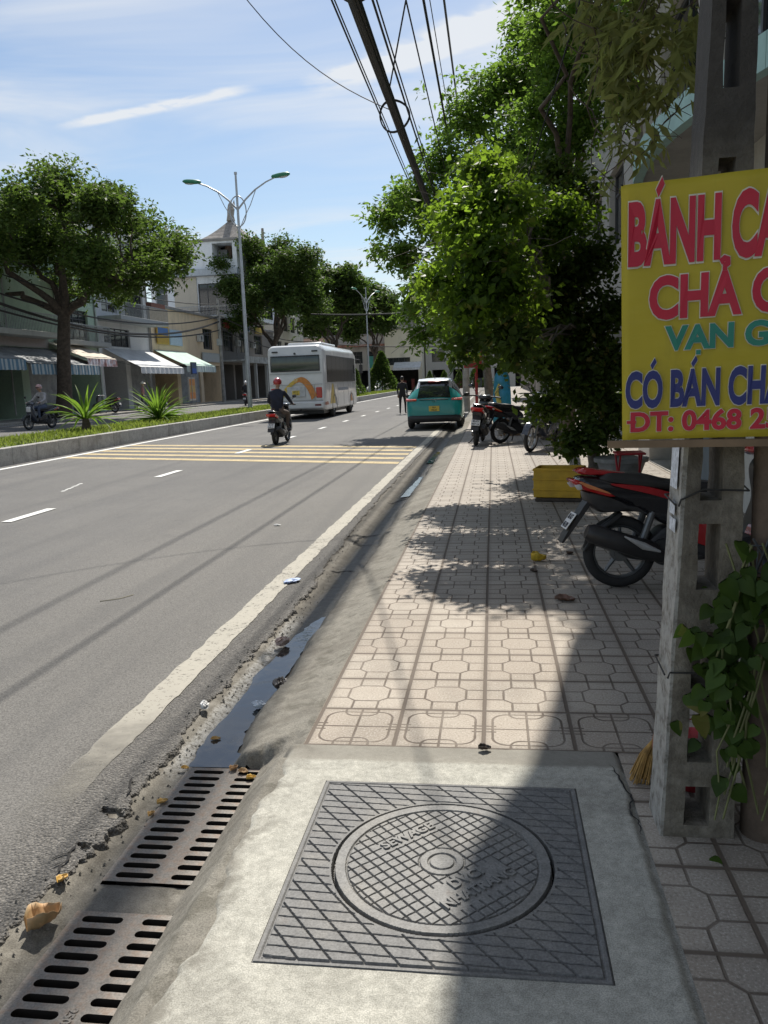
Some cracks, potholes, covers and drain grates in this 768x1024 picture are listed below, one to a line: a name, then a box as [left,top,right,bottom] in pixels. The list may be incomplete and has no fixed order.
manhole cover [251,781,615,986]
crack [610,765,642,832]
drain grate [0,910,172,1024]
drain grate [102,767,260,889]
crack [52,845,76,873]
